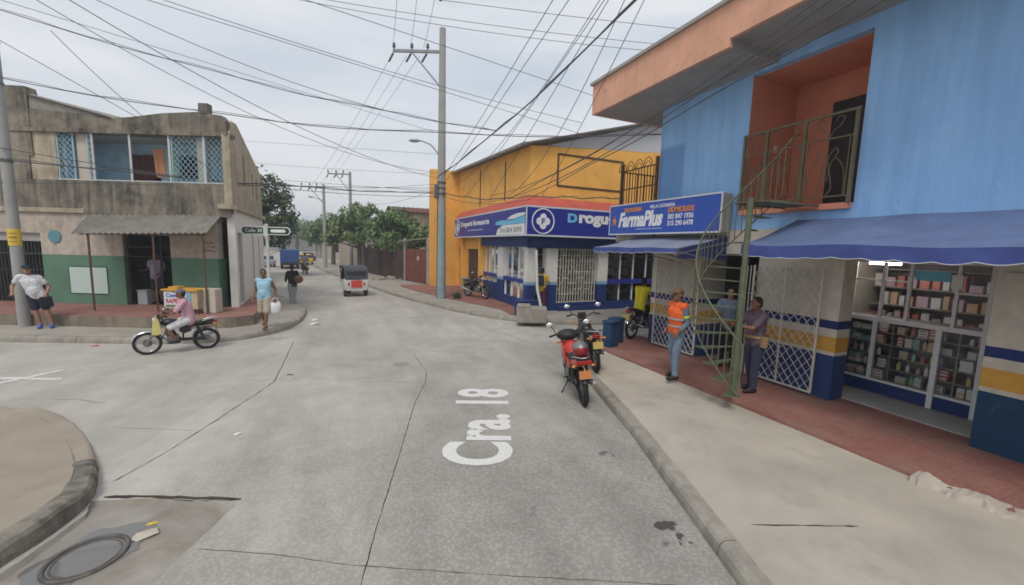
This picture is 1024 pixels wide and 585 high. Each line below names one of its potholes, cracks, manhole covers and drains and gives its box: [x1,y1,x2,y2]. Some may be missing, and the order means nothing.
manhole cover [37,533,131,585]
